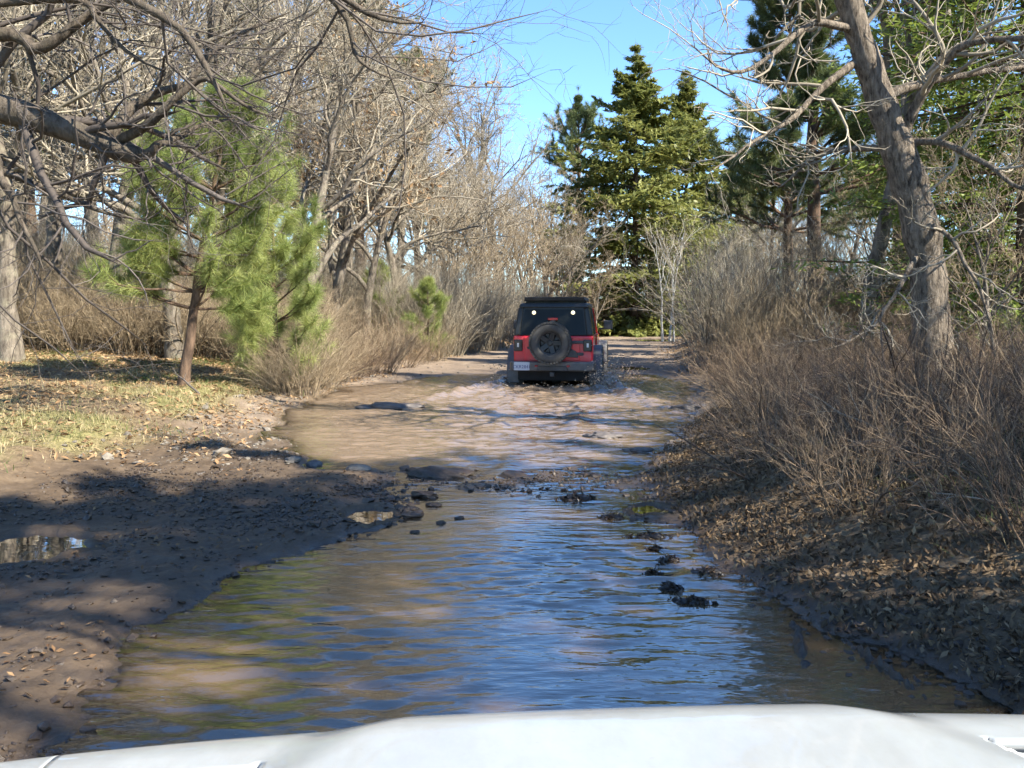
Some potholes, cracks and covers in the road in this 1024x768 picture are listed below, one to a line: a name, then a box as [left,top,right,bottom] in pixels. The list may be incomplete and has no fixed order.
pothole [0,524,113,569]
